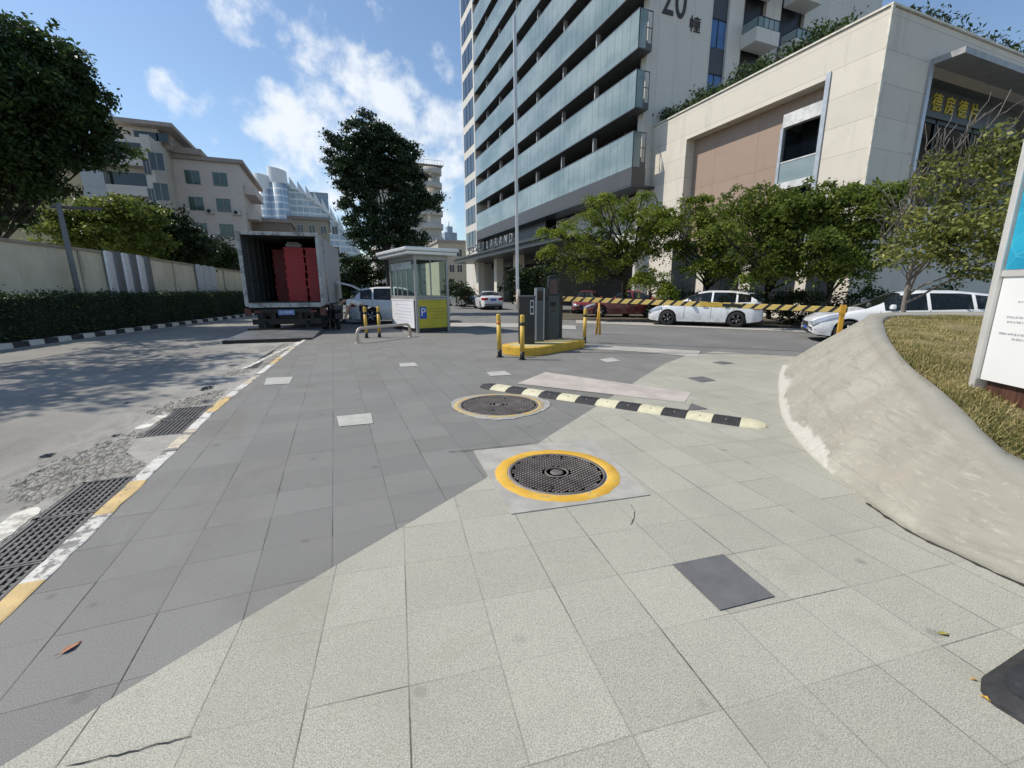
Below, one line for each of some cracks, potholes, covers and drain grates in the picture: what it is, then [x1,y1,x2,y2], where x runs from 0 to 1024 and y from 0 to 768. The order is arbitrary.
crack [66,736,190,766]
manhole cover [451,394,550,421]
manhole cover [474,439,650,515]
drain grate [0,476,135,601]
drain grate [136,405,213,438]
